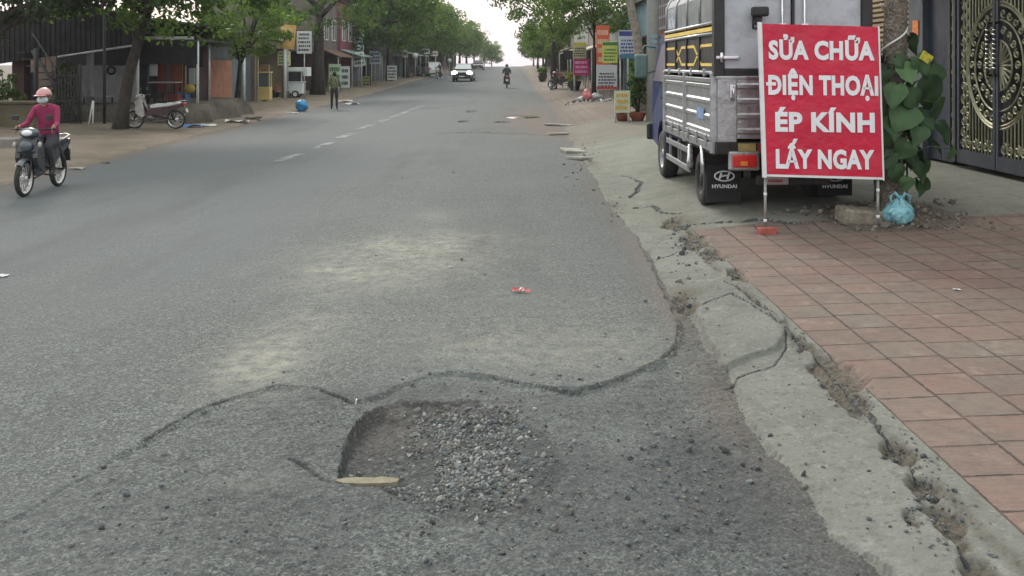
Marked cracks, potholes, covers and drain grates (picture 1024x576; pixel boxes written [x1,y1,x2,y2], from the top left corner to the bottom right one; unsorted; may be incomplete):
crack [622,175,802,228]
pothole [337,398,569,524]
